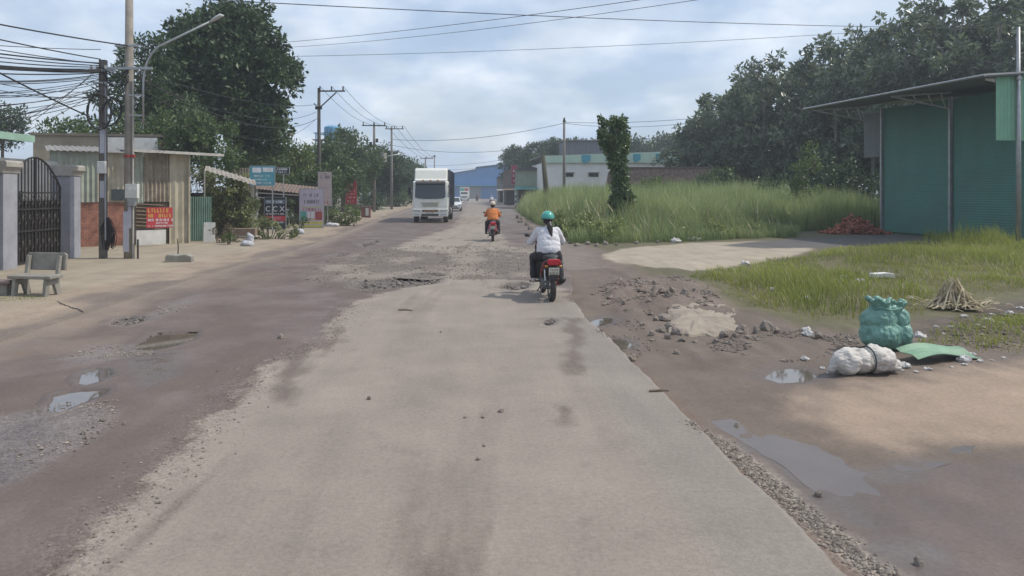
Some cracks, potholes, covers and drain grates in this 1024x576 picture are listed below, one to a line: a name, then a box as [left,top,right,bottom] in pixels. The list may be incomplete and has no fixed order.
pothole [487,280,540,292]
pothole [339,275,453,291]
pothole [121,329,207,353]
pothole [97,314,159,328]
pothole [34,386,118,417]
pothole [393,272,458,280]
pothole [65,366,126,388]
